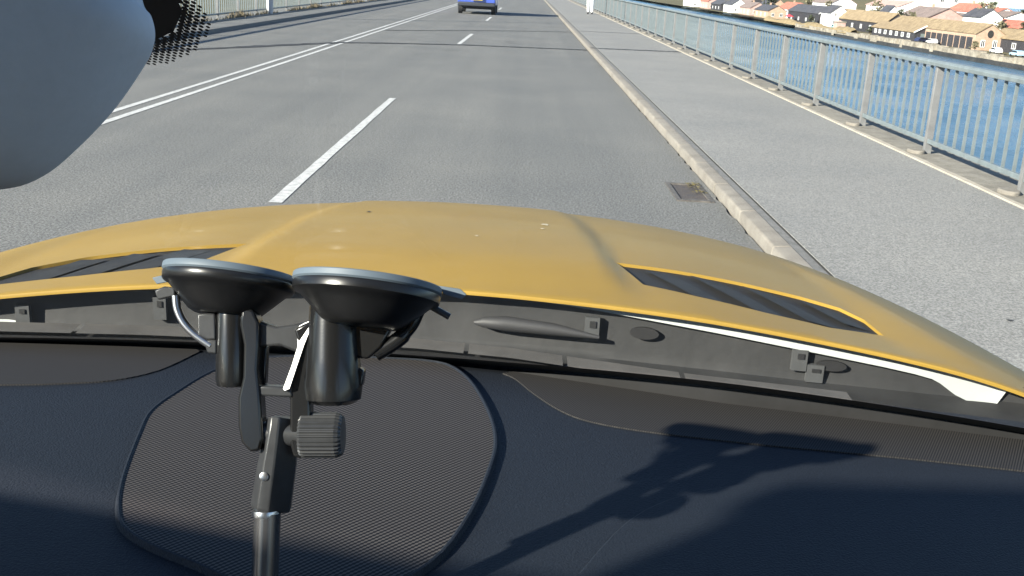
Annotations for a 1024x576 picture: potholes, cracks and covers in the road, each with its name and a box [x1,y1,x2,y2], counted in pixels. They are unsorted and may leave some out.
drain grate [665,182,715,203]
